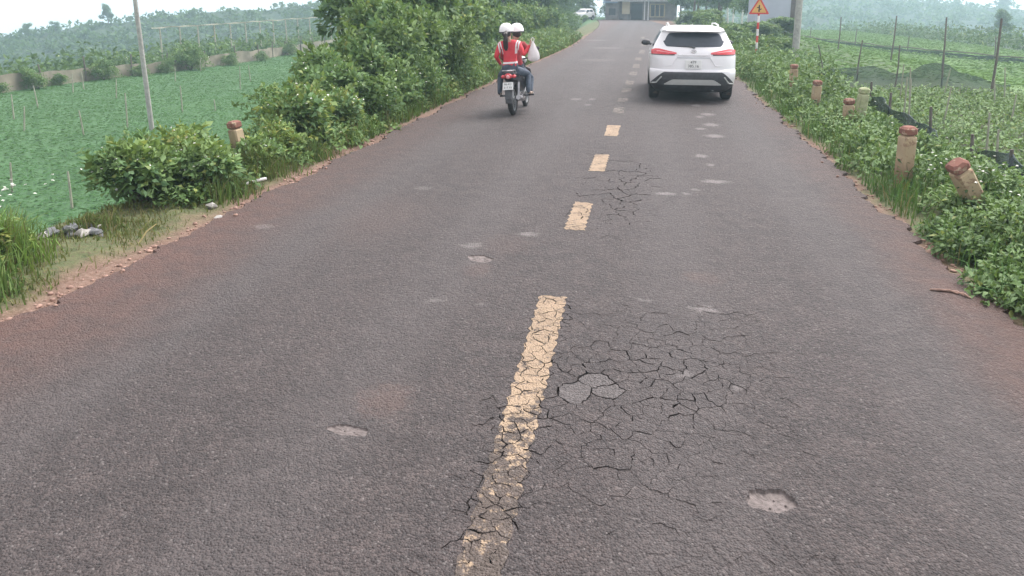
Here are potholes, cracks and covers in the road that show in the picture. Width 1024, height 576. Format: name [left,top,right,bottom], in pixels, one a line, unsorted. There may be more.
pothole [746,489,799,514]
crack [555,152,661,239]
pothole [326,424,369,436]
pothole [467,255,493,263]
crack [412,293,851,576]
